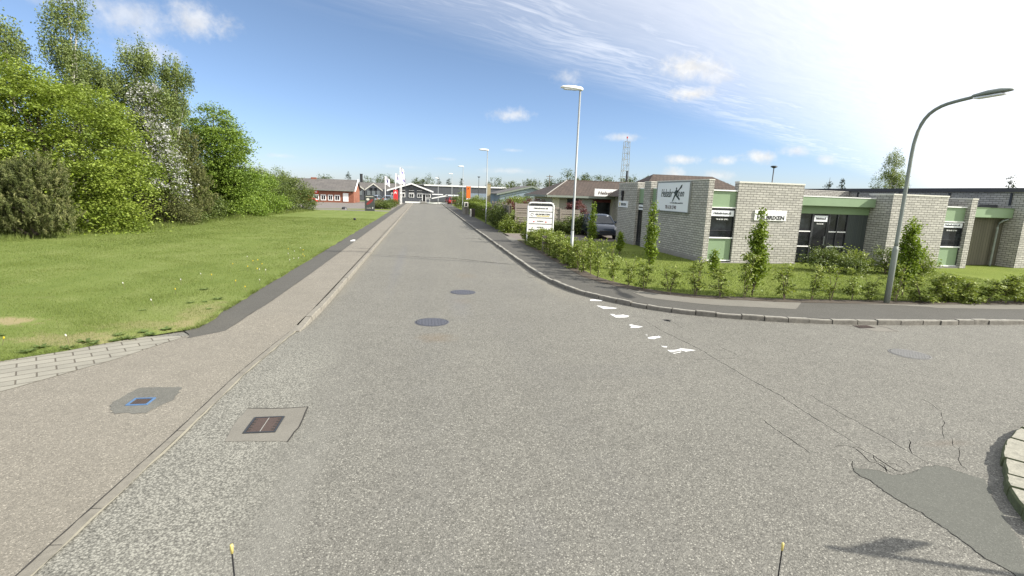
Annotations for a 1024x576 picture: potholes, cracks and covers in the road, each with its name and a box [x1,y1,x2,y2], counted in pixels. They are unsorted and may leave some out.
crack [644,320,927,473]
manhole cover [415,318,449,326]
manhole cover [888,349,932,360]
crack [922,399,985,475]
drain grate [225,406,308,442]
